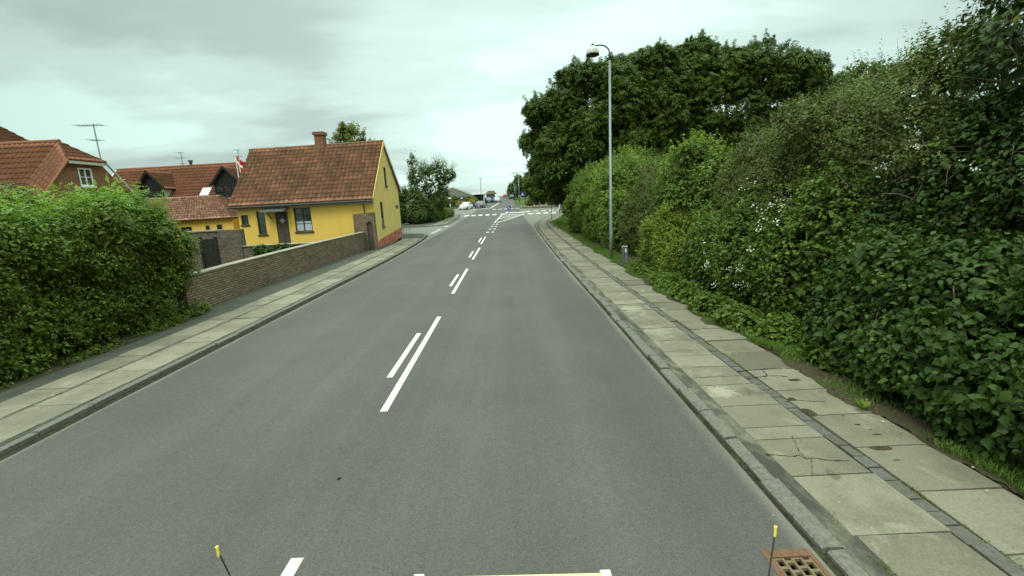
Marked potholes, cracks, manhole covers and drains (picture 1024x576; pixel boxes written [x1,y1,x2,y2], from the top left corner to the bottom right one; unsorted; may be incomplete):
crack [766,436,848,475]
drain grate [761,548,831,576]
